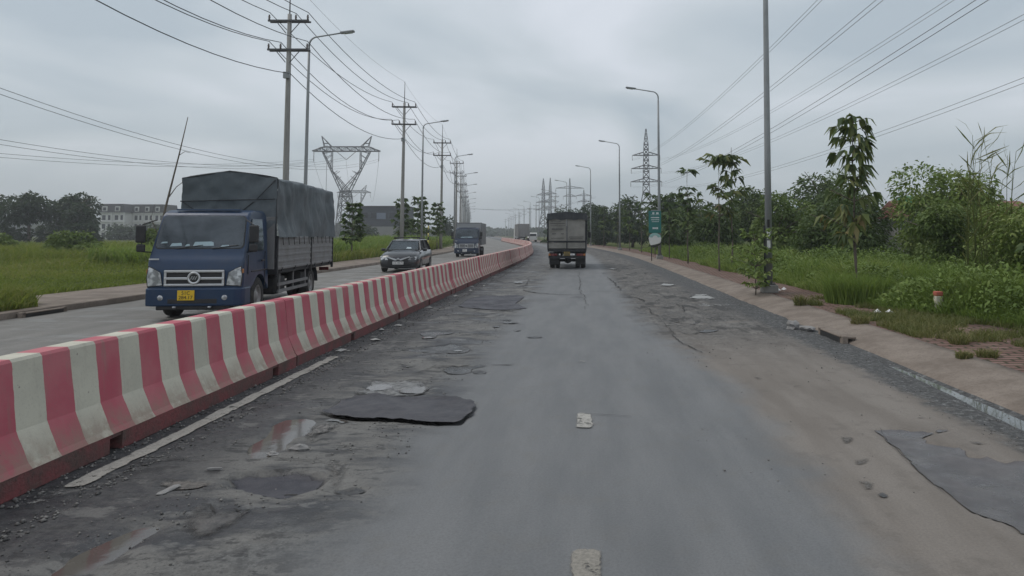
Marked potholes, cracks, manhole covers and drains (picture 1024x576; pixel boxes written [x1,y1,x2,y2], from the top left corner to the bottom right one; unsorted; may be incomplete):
pothole [359,380,427,396]
pothole [409,344,470,354]
crack [607,277,702,352]
pothole [231,473,324,499]
pothole [443,365,484,374]
